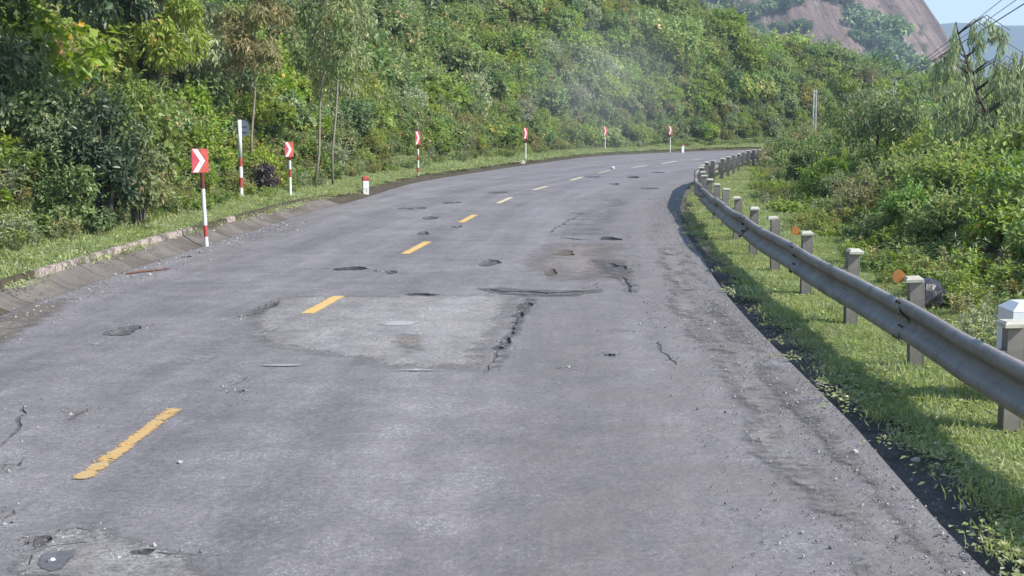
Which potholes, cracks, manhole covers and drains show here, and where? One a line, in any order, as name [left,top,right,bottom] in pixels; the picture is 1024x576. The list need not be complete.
pothole [246,301,280,316]
crack [656,342,677,365]
crack [622,278,632,293]
crack [0,406,27,470]
crack [487,282,599,371]
pothole [103,325,141,336]
crack [548,213,597,240]
